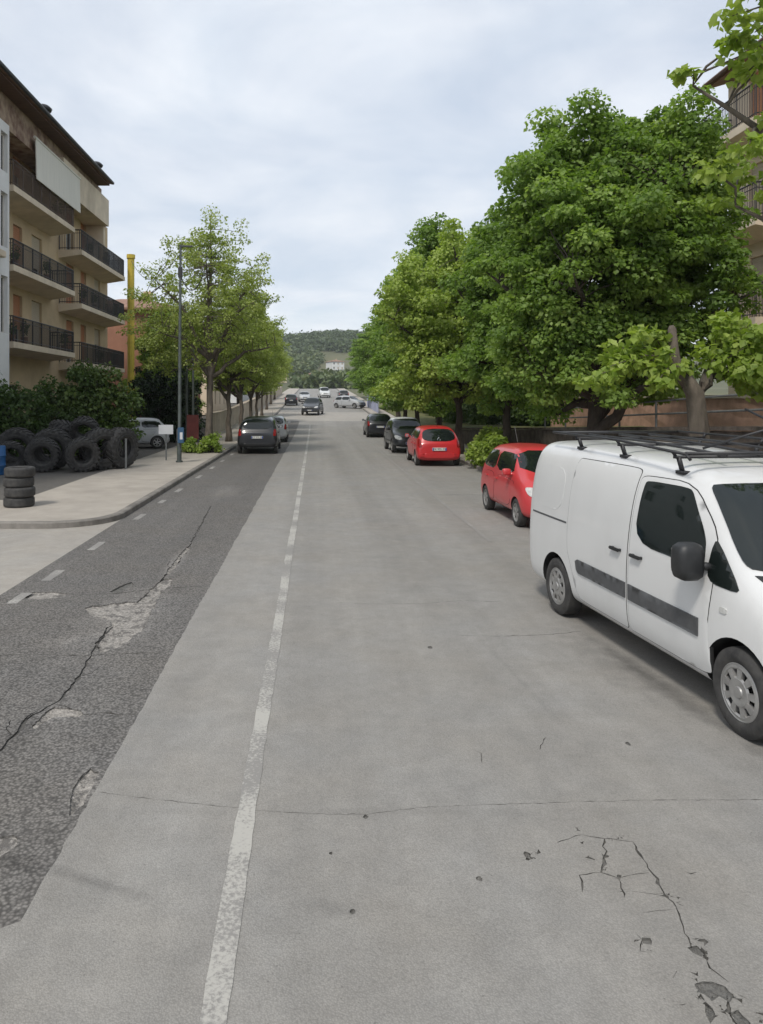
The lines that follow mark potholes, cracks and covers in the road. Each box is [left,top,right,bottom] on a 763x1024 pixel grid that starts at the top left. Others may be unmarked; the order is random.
crack [526,828,763,1024]
crack [0,506,211,751]
pothole [69,768,99,816]
pothole [85,578,172,653]
